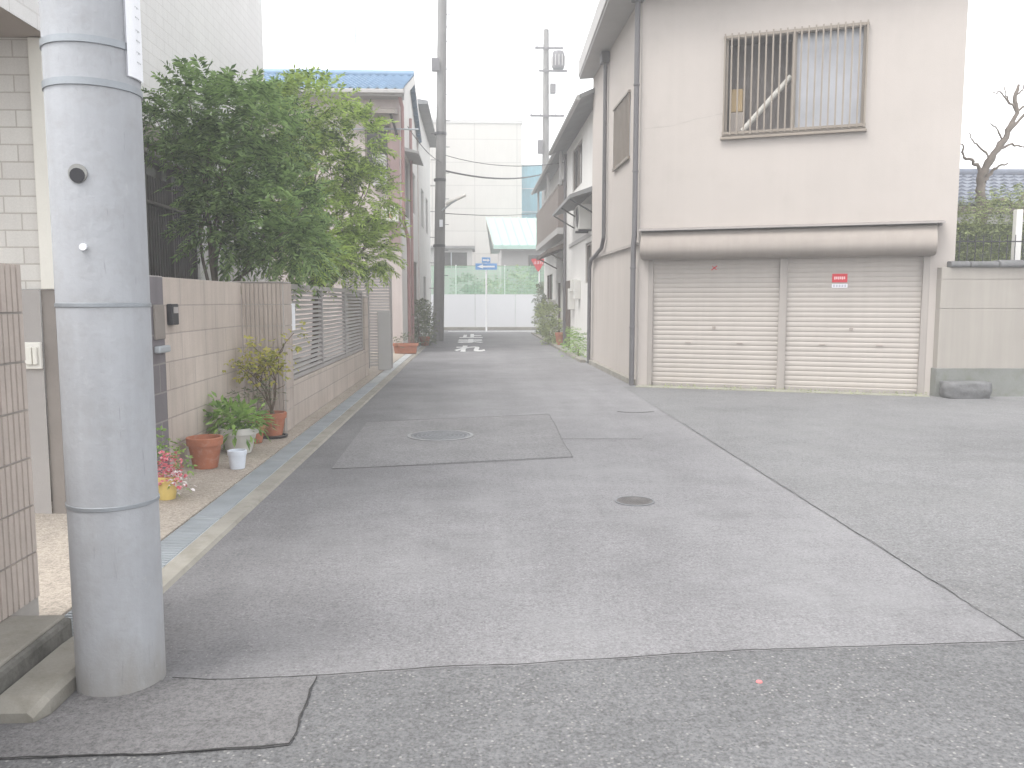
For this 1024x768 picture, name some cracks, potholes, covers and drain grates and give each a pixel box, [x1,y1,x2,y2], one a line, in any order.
drain grate [268,441,310,460]
drain grate [311,415,341,427]
drain grate [293,426,328,441]
drain grate [191,484,260,518]
drain grate [326,405,353,415]
drain grate [339,396,363,405]
manhole cover [407,430,473,441]
manhole cover [614,496,655,506]
drain grate [235,460,288,485]
drain grate [161,518,220,566]
